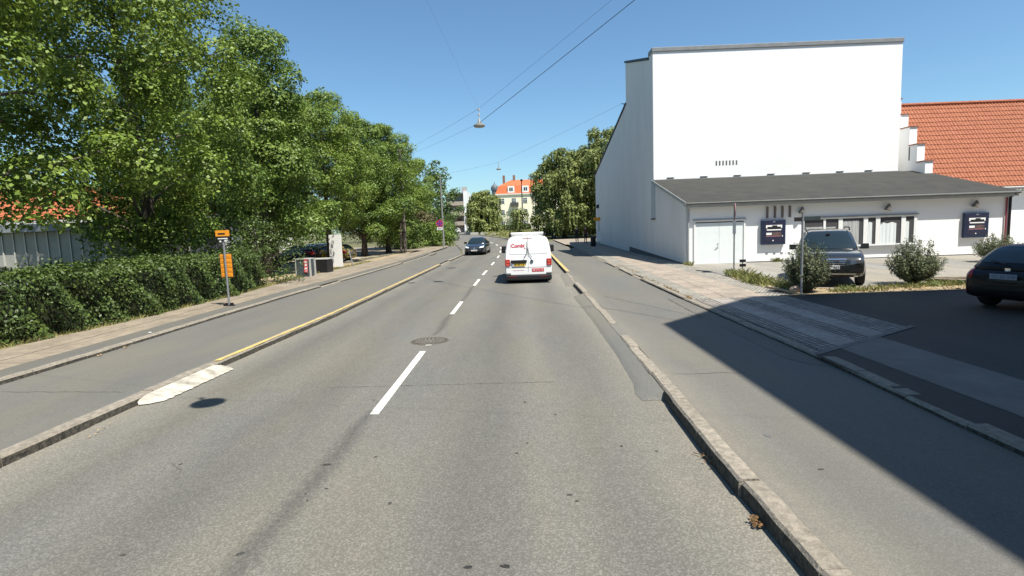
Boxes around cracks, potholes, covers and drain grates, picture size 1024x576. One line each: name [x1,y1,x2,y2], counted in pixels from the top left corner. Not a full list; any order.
manhole cover [410,337,449,345]
